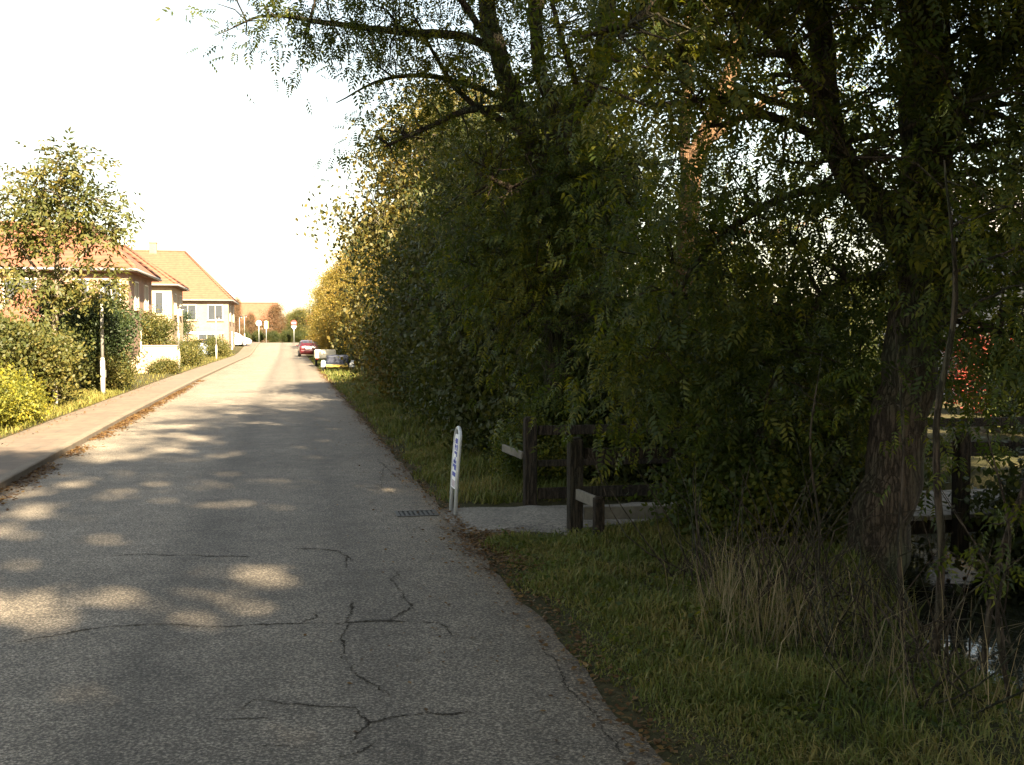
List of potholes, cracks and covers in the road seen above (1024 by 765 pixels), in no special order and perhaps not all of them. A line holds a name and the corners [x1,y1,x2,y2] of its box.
crack [546,654,623,753]
crack [301,548,354,568]
crack [18,570,452,695]
crack [227,699,471,758]
drain grate [394,509,439,517]
